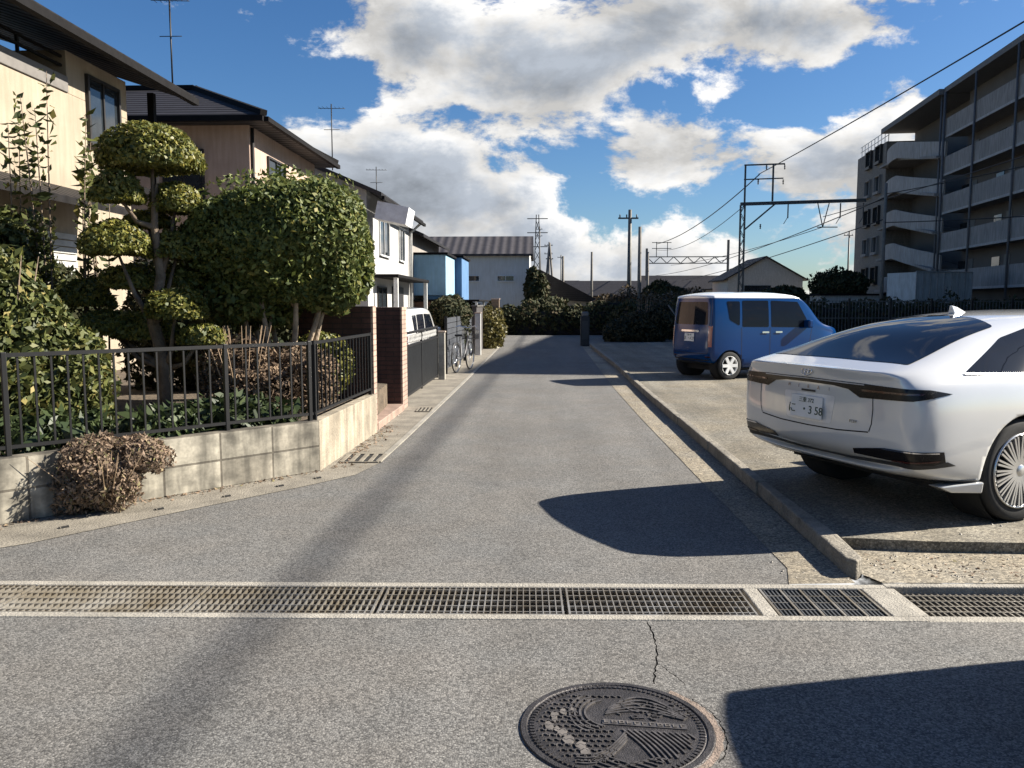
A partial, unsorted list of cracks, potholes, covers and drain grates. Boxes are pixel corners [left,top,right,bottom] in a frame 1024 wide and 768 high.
drain grate [565,587,759,616]
crack [647,622,681,684]
drain grate [375,587,565,615]
drain grate [339,453,387,463]
drain grate [758,589,890,616]
drain grate [901,594,1024,617]
drain grate [183,586,385,614]
drain grate [0,585,35,607]
manhole cover [520,682,725,768]
